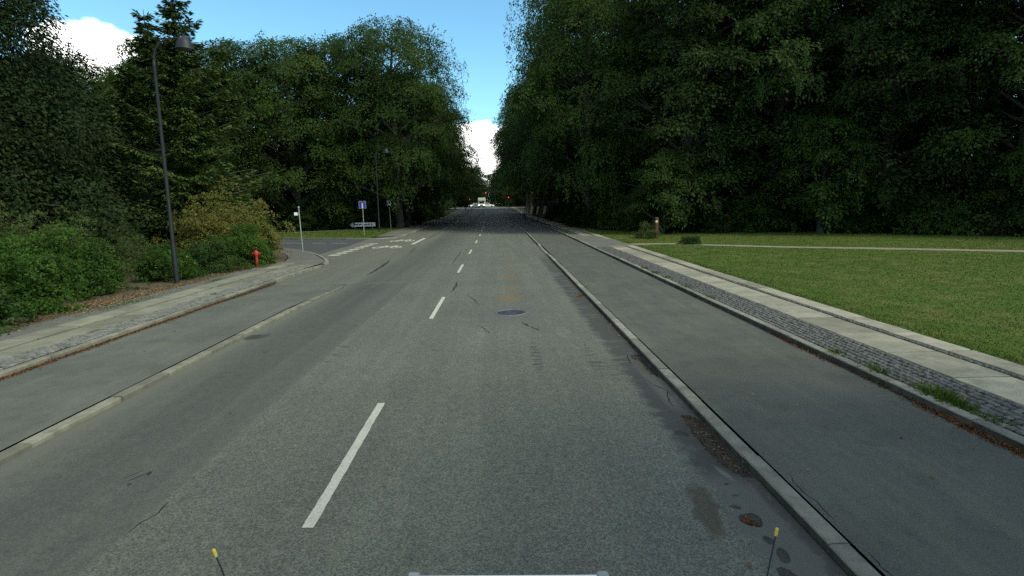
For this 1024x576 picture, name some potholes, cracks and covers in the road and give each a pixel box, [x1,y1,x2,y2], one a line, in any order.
pothole [776,547,791,564]
pothole [738,513,763,527]
